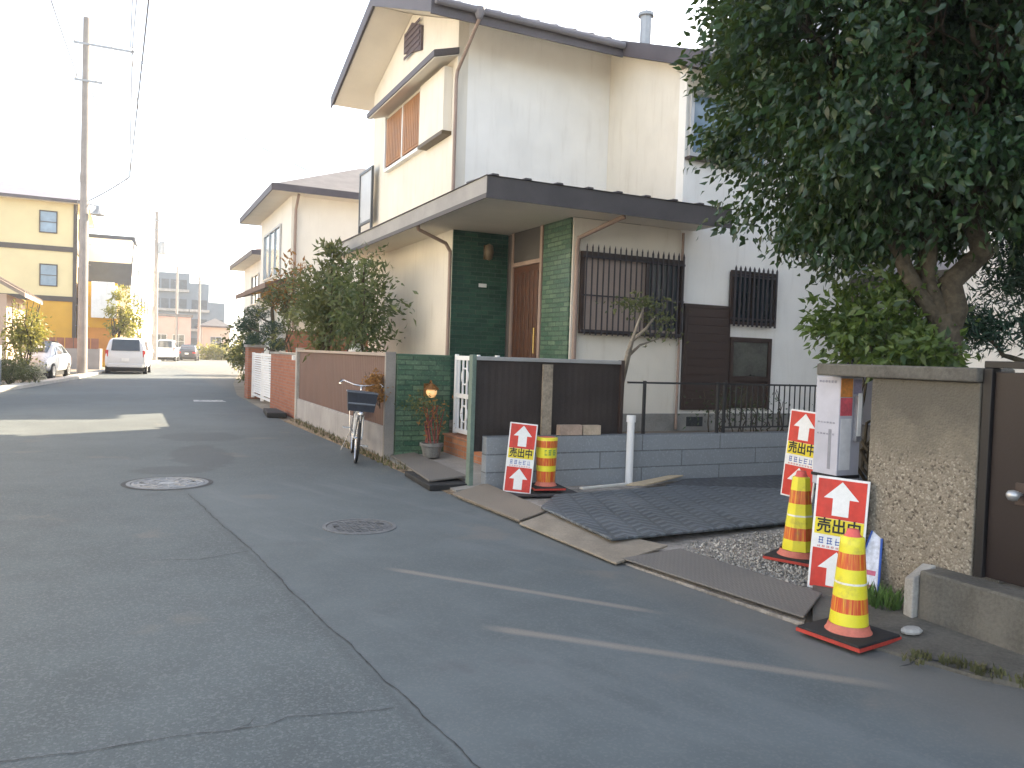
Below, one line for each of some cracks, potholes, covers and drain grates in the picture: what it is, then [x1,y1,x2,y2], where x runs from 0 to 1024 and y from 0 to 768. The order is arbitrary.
manhole cover [120,476,213,490]
manhole cover [322,518,396,535]
crack [0,707,396,762]
